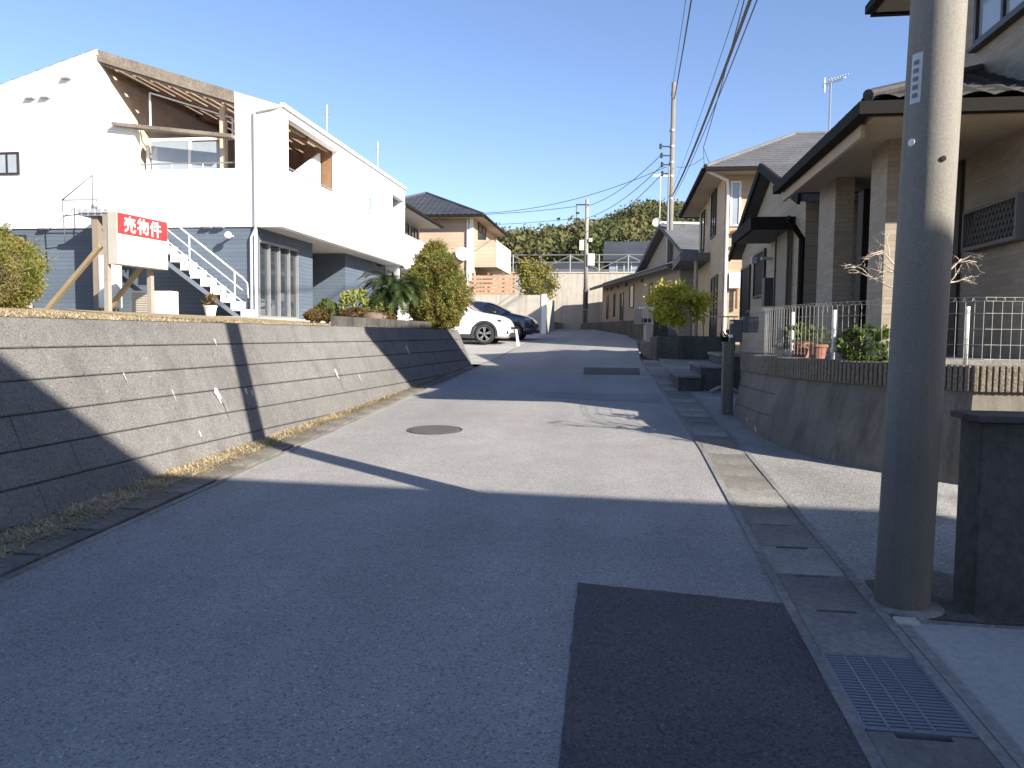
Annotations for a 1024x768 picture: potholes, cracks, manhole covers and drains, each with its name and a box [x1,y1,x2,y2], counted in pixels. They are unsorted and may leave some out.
manhole cover [406,425,463,435]
drain grate [821,653,979,742]
